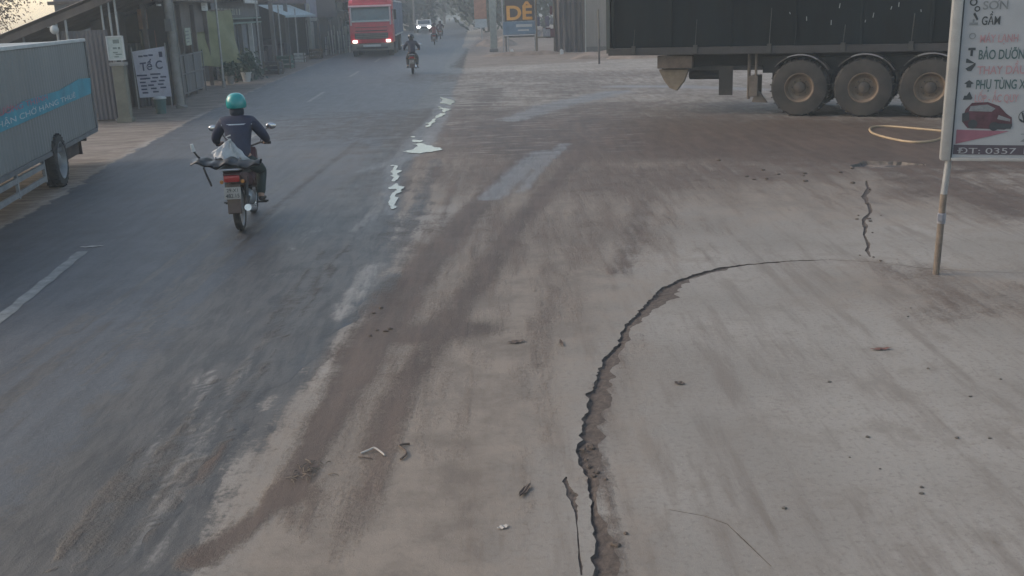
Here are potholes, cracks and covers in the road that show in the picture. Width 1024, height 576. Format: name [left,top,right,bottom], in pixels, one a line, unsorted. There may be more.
crack [844,182,1015,273]
crack [562,260,815,576]
